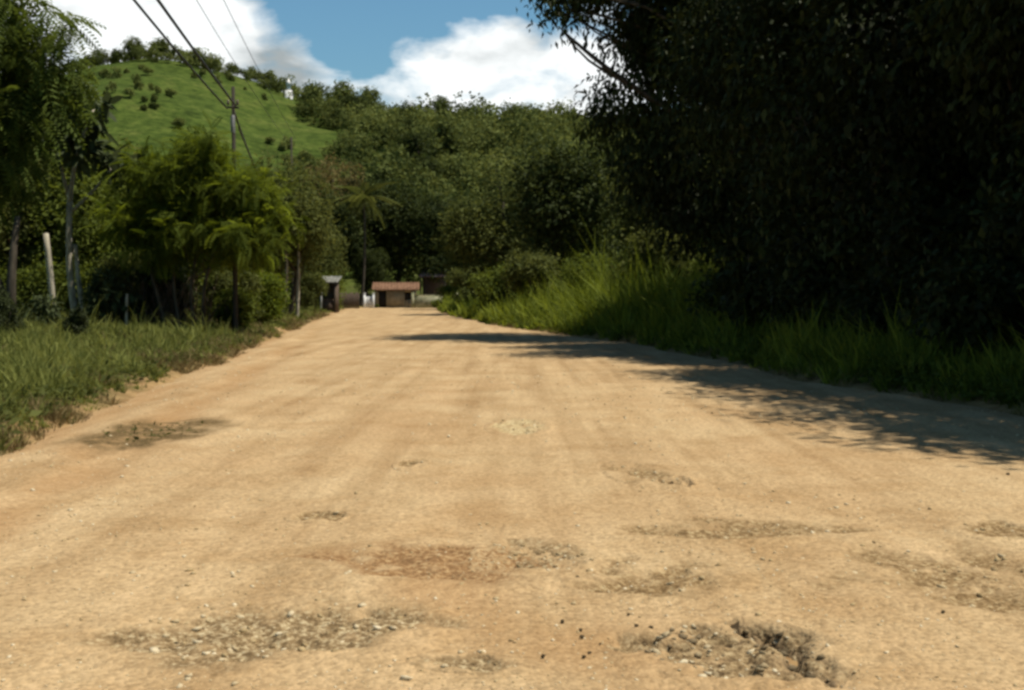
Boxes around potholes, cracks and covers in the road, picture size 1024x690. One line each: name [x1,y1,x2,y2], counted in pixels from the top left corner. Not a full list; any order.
pothole [405,653,551,676]
pothole [273,537,586,596]
pothole [467,537,612,578]
pothole [599,460,699,490]
pothole [483,418,555,437]
pothole [942,518,1024,546]
pothole [777,536,1024,621]
pothole [600,617,862,690]
pothole [283,510,353,523]
pothole [62,592,472,675]
pothole [573,517,896,545]
